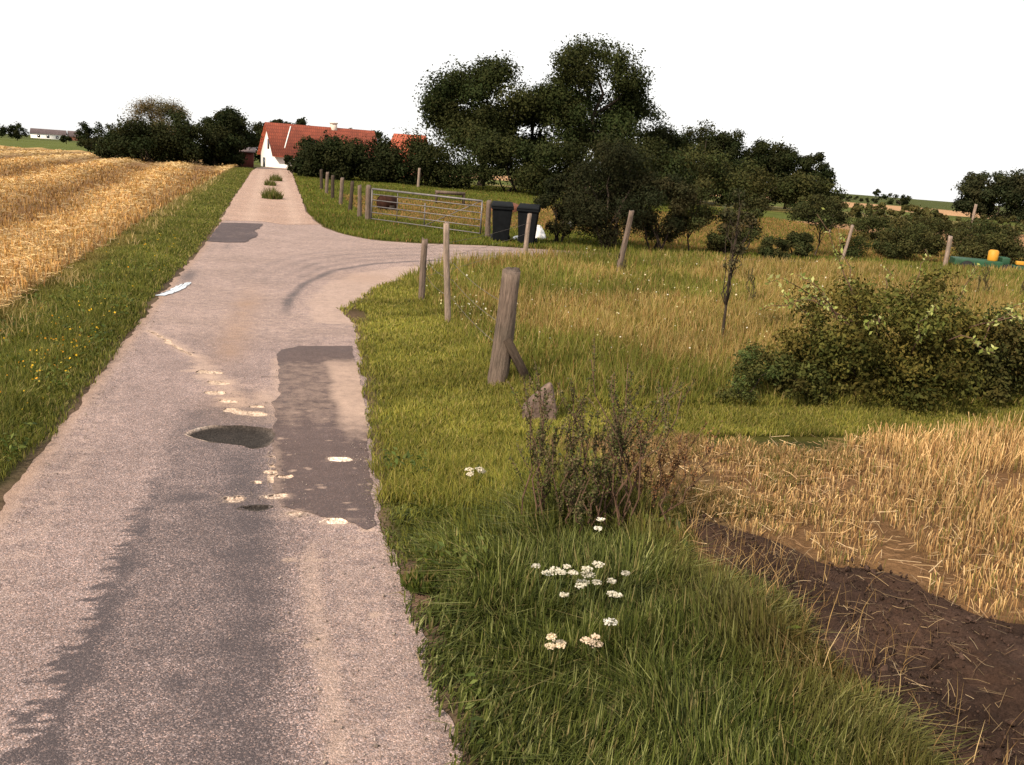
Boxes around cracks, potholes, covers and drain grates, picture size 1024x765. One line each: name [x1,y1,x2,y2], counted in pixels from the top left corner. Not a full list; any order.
pothole [184,425,276,449]
